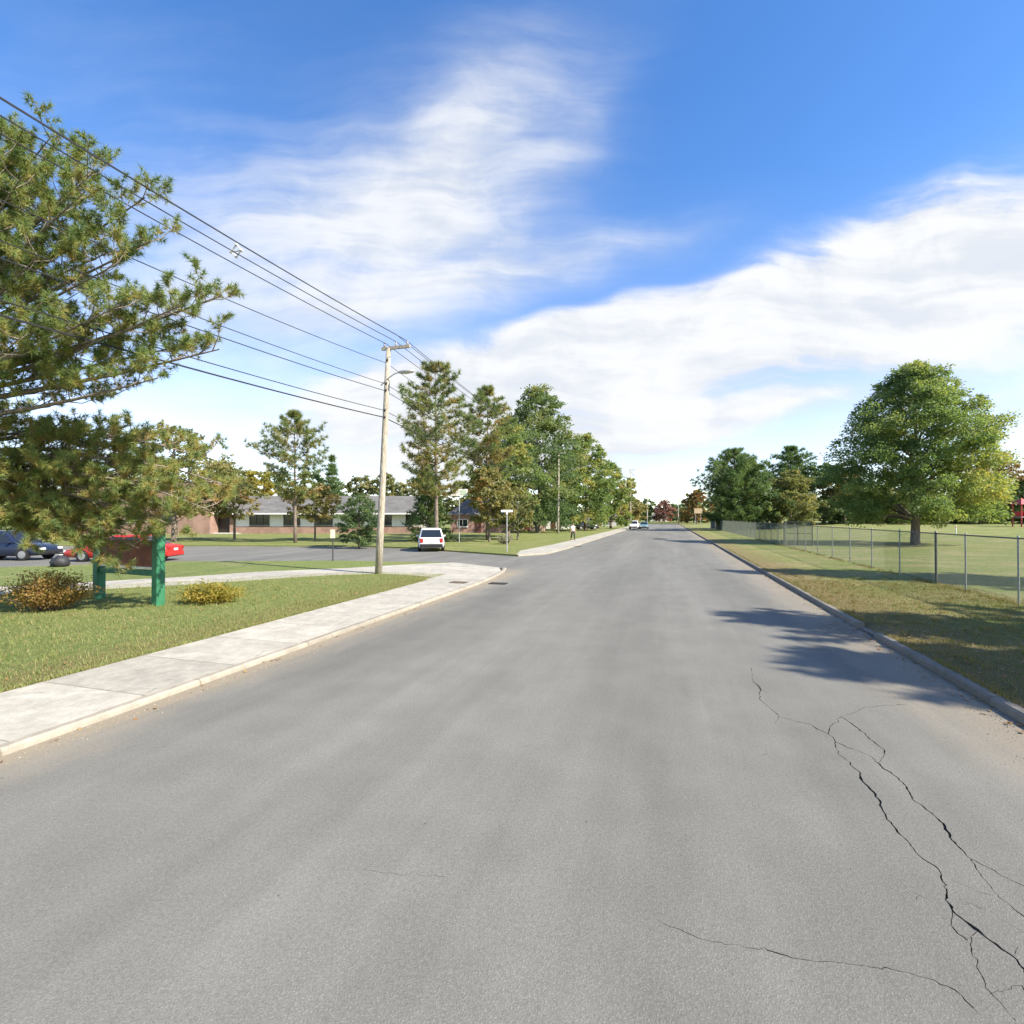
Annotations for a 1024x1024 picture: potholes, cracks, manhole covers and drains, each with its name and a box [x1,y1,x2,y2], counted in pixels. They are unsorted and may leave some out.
crack [660,669,1024,1021]
